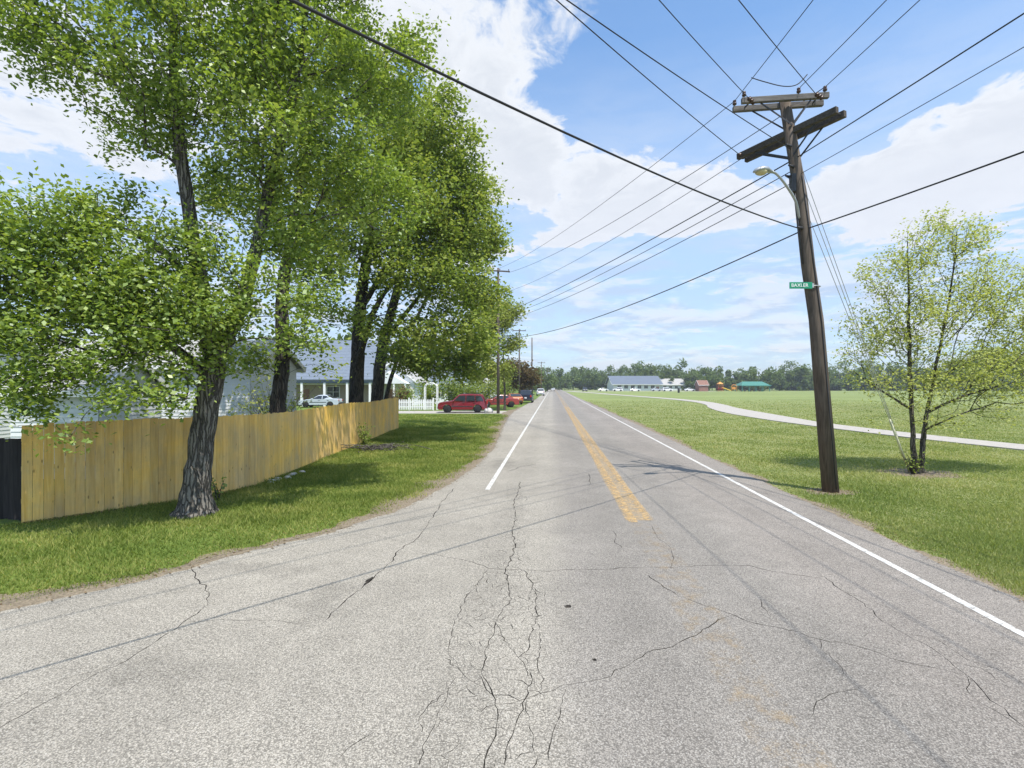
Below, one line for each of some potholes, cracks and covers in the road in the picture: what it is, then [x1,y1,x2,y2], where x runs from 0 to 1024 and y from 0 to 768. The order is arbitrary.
crack [419,482,1024,768]
crack [1,566,300,727]
